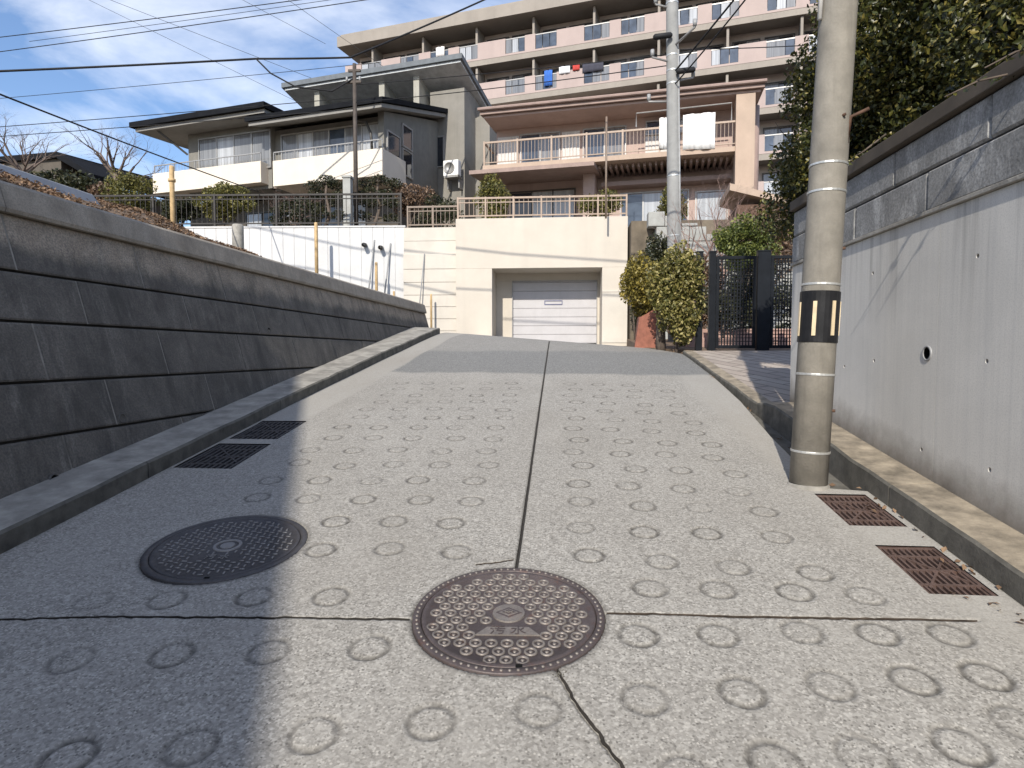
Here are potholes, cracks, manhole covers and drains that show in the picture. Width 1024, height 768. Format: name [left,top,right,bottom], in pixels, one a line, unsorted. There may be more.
drain grate [876,546,997,596]
drain grate [816,495,907,547]
drain grate [231,421,305,445]
manhole cover [140,515,308,585]
manhole cover [412,568,605,677]
drain grate [176,444,269,469]
crack [551,669,625,768]
